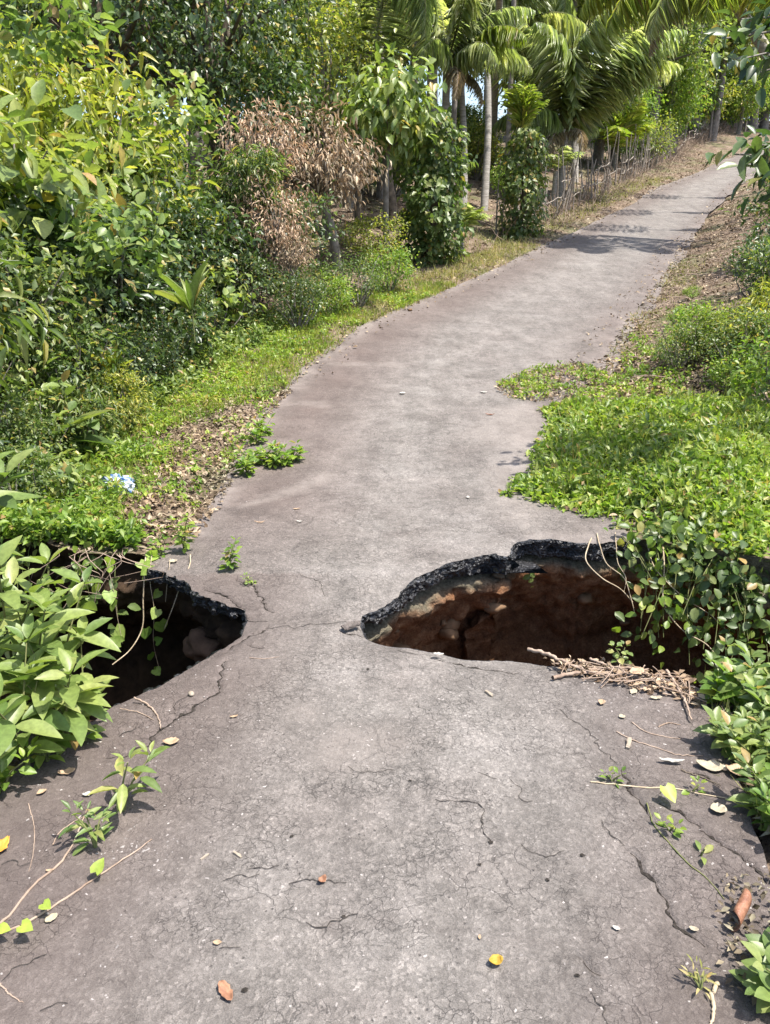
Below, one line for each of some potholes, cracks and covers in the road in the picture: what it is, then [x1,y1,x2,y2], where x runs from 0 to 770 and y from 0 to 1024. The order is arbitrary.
crack [306,913,358,928]
pothole [360,539,770,688]
pothole [0,535,248,722]
crack [223,865,346,884]
crack [560,709,767,947]
crack [112,581,363,758]
crack [435,799,492,842]
crack [398,650,520,674]
